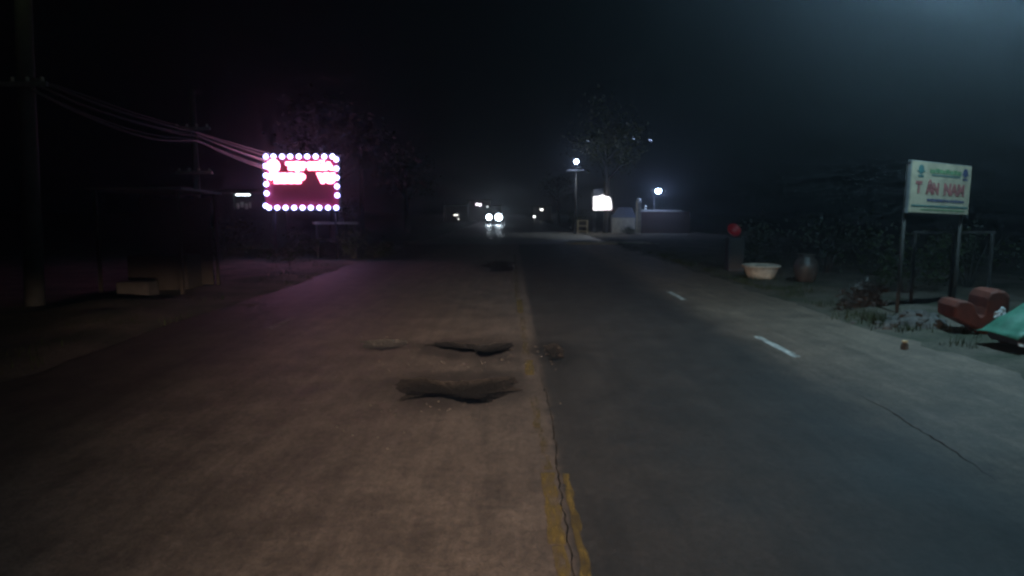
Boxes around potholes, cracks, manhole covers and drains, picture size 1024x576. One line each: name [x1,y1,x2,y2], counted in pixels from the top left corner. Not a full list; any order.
crack [539,374,575,576]
pothole [395,377,524,404]
pothole [425,341,514,357]
pothole [481,261,517,272]
pothole [359,339,408,351]
crack [858,394,996,481]
pothole [542,343,564,362]
